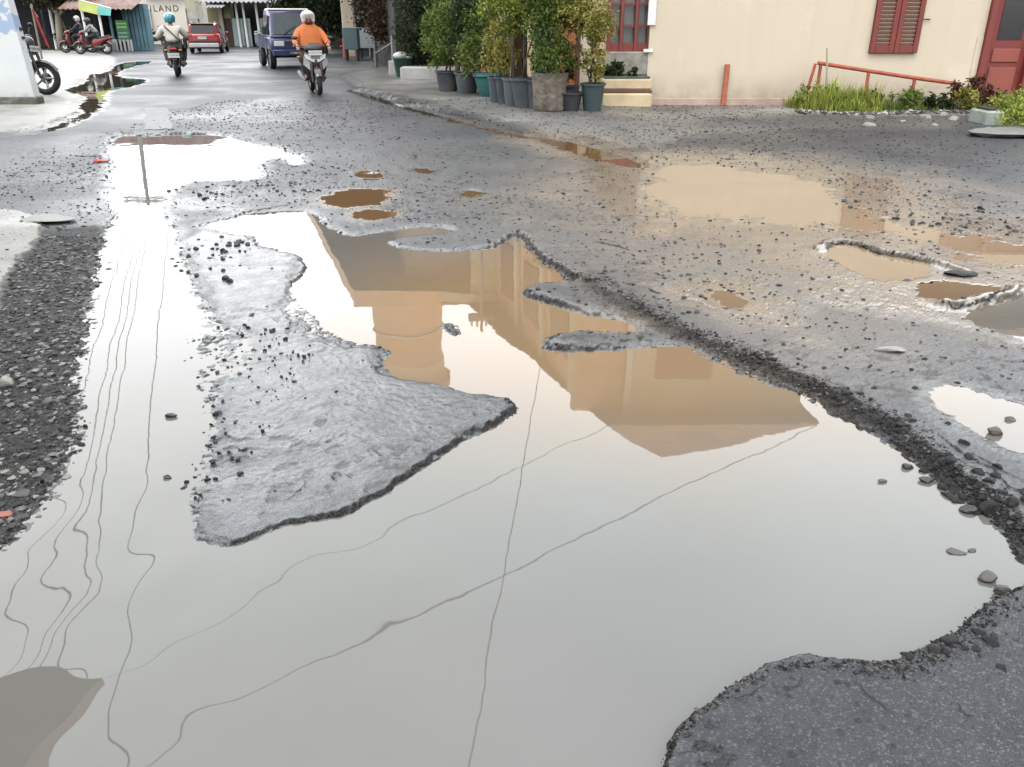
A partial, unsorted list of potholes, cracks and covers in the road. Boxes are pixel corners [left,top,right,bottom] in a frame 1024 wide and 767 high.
pothole [315,188,399,209]
pothole [346,208,402,223]
pothole [148,221,1024,767]
pothole [454,188,493,199]
pothole [350,170,390,180]
